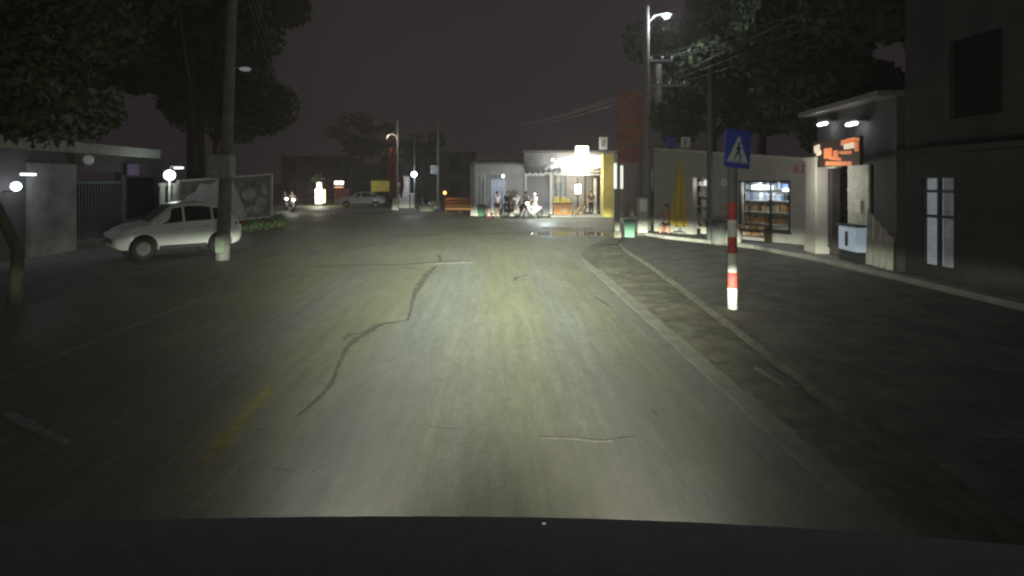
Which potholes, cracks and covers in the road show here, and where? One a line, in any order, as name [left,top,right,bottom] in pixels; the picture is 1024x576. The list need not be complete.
crack [296,255,442,416]
